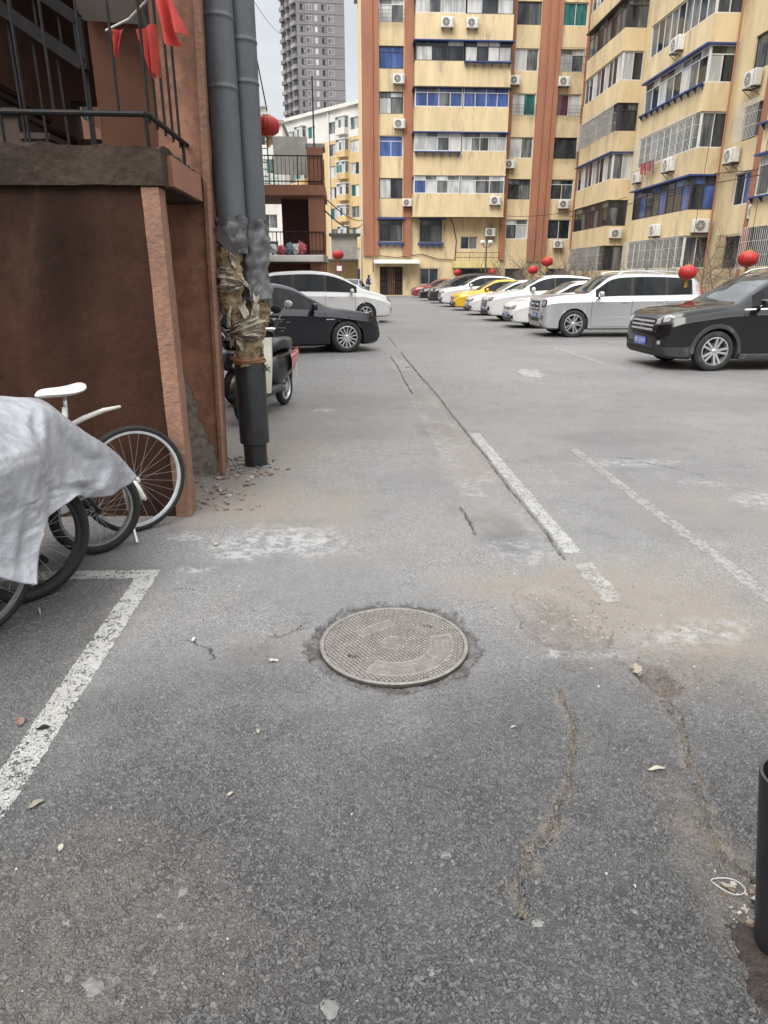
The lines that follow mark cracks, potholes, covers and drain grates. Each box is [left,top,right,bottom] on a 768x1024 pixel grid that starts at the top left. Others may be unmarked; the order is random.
manhole cover [304,604,482,696]
crack [186,640,216,661]
crack [512,688,578,920]
crack [660,702,753,883]
crack [388,337,565,560]
